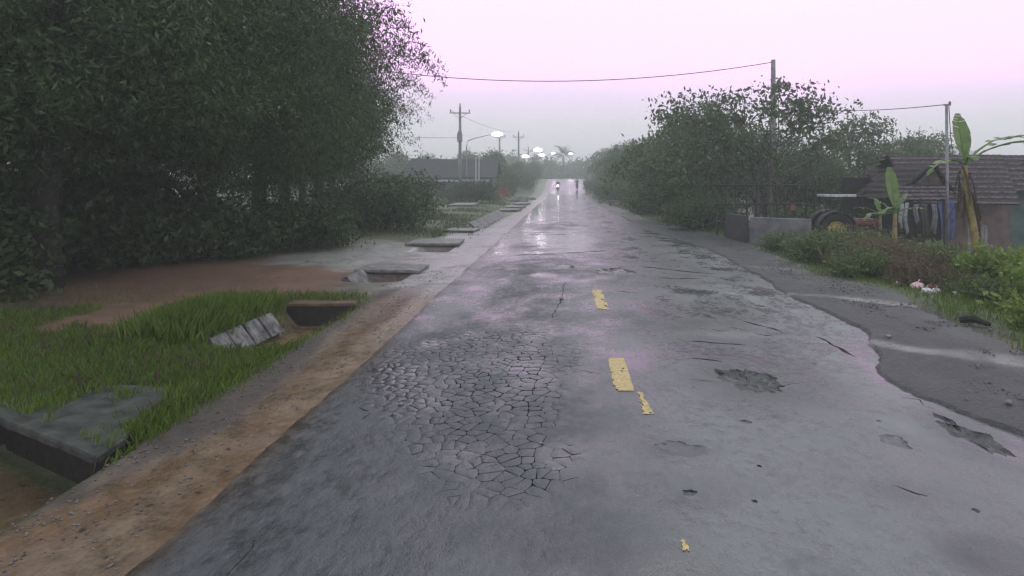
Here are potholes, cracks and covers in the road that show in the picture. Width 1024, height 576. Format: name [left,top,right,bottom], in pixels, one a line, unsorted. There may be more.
crack [818,337,855,357]
pothole [879,434,913,449]
pothole [714,369,785,394]
pothole [934,420,1016,457]
pothole [653,440,710,458]
crack [368,326,583,506]
